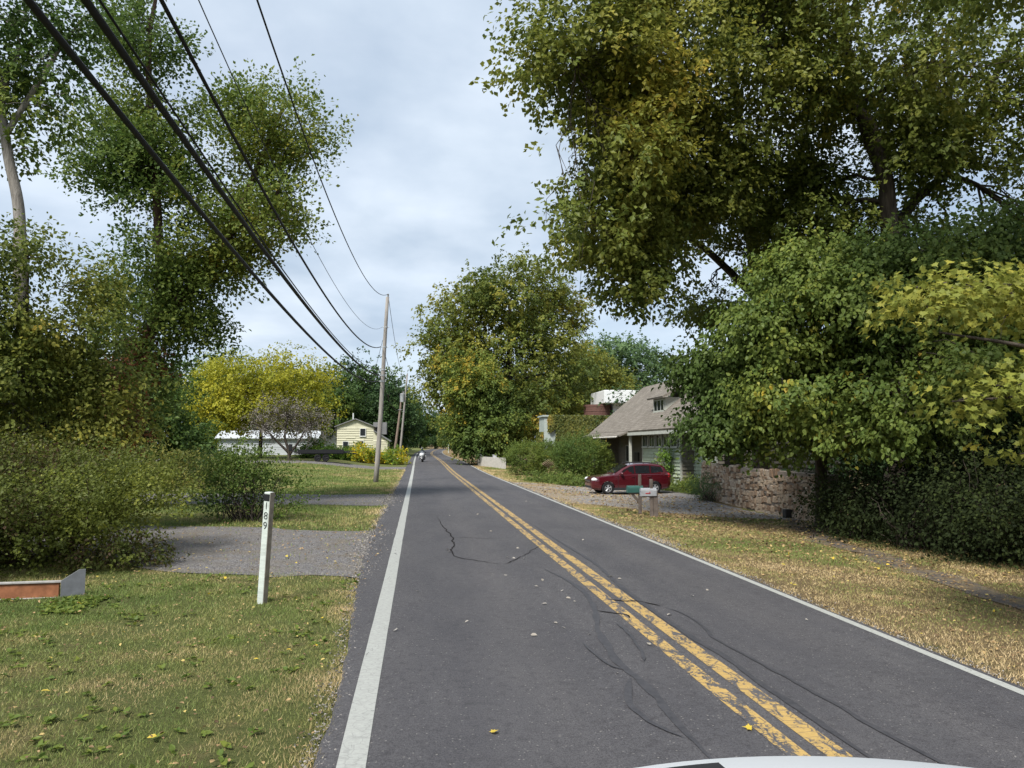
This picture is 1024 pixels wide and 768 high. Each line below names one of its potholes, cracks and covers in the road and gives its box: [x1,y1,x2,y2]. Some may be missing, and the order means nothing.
crack [436,515,537,563]
crack [598,599,657,618]
